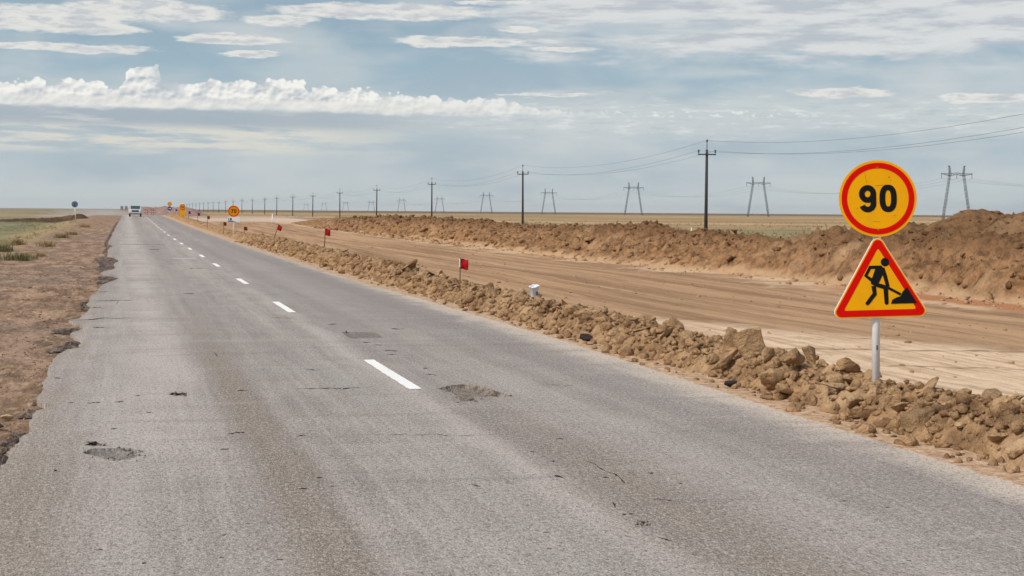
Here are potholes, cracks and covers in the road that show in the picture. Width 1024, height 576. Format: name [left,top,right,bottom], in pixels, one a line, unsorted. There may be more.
pothole [83,448,144,461]
pothole [47,341,81,353]
pothole [439,384,508,401]
